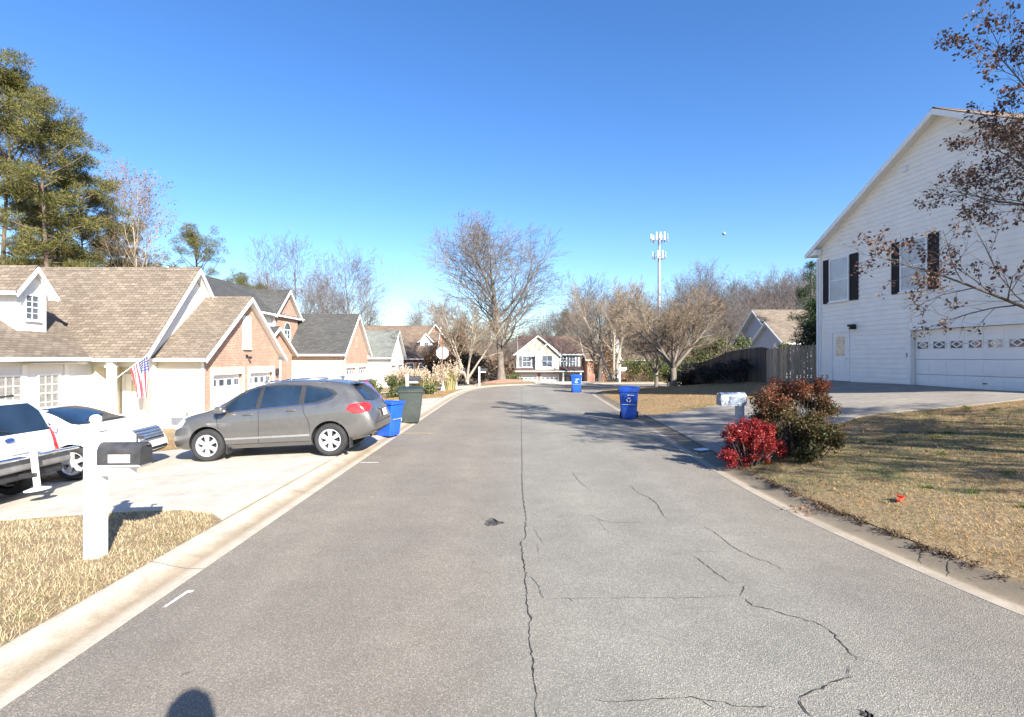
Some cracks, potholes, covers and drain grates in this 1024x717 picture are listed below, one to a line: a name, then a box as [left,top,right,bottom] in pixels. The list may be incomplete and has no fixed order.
pothole [484,518,504,526]
crack [546,528,884,717]
crack [520,395,542,717]
